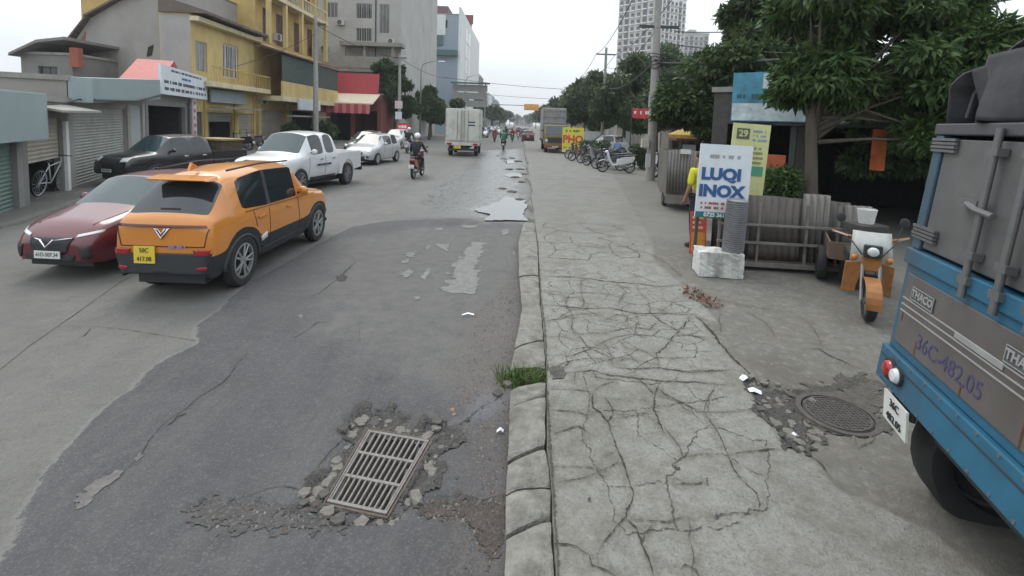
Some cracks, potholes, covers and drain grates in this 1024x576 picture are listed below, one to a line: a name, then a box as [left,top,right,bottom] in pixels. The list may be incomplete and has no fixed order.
crack [107,347,249,490]
drain grate [323,427,433,519]
crack [542,211,788,576]
manhole cover [793,392,882,439]
